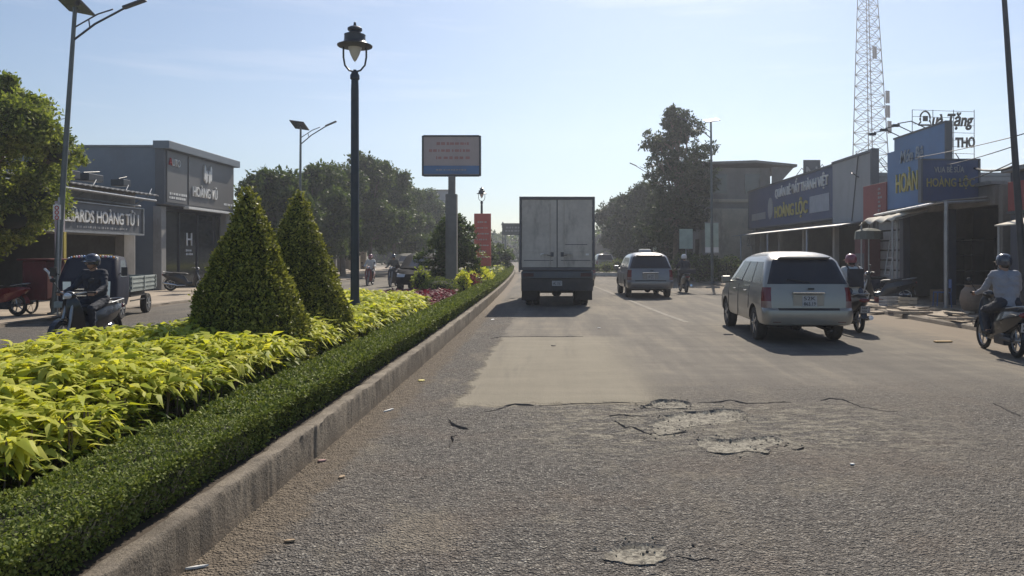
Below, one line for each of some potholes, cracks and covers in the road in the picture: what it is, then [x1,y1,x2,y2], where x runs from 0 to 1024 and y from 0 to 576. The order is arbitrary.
crack [447,402,651,448]
pothole [590,536,695,572]
pothole [644,406,750,439]
pothole [634,397,692,412]
pothole [689,434,803,458]
crack [821,398,897,412]
